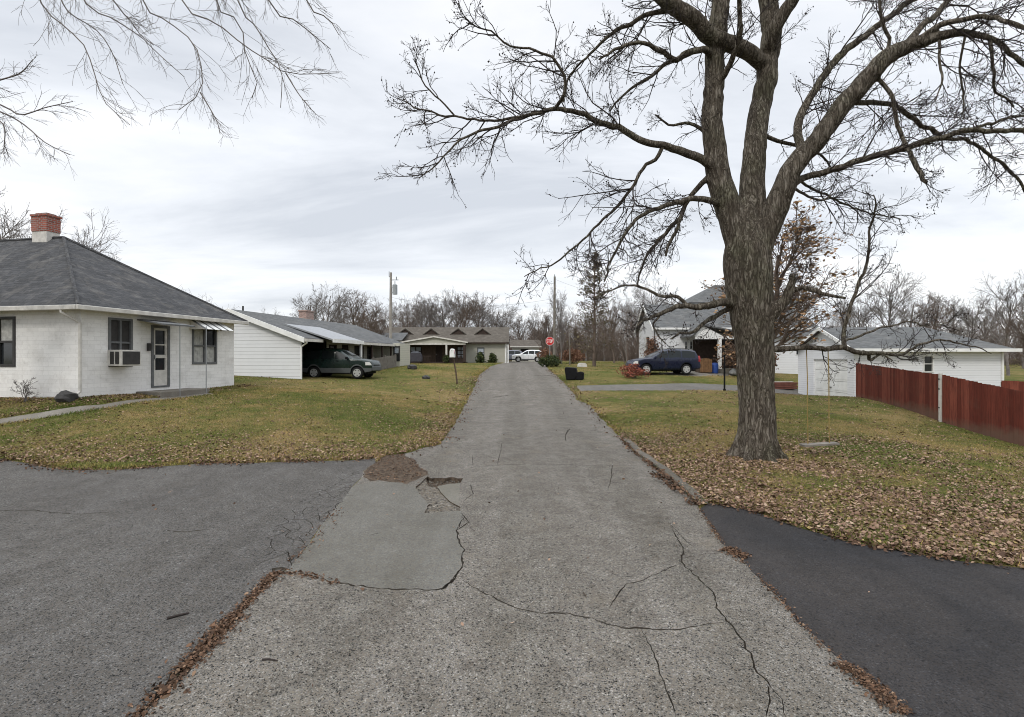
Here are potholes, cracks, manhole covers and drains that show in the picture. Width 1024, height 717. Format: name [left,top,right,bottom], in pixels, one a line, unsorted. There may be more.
crack [260,471,786,717]
pothole [416,476,463,513]
